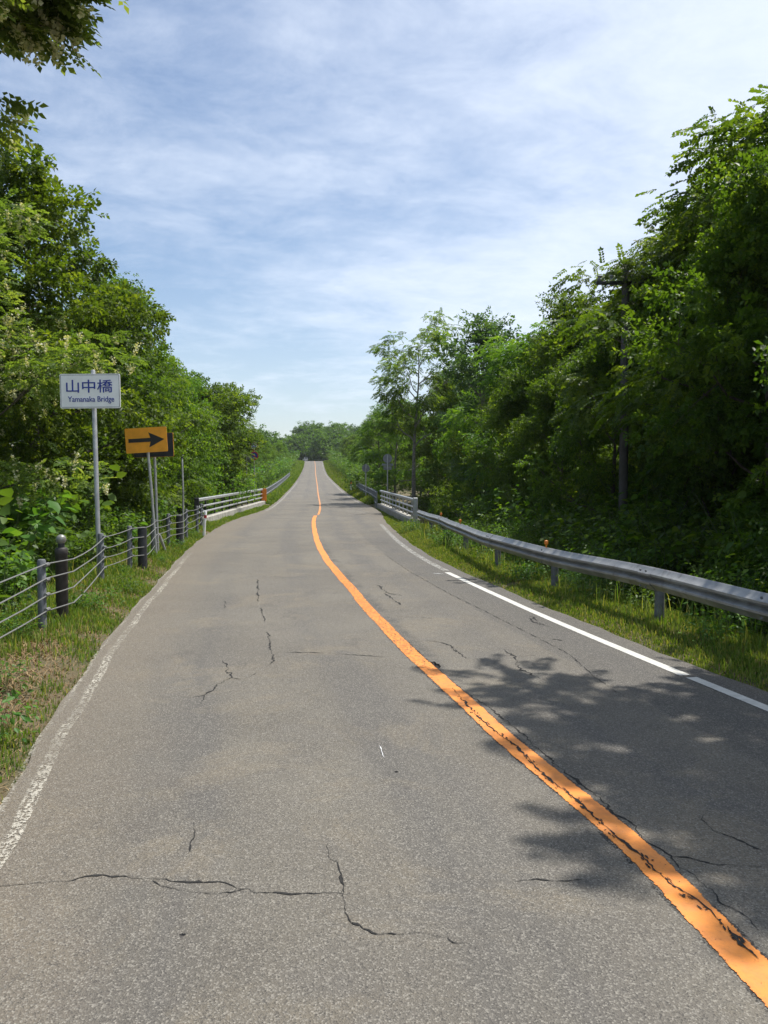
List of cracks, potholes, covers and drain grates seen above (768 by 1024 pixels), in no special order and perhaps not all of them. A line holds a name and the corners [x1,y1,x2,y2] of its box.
crack [191,580,380,705]
crack [4,845,466,943]
